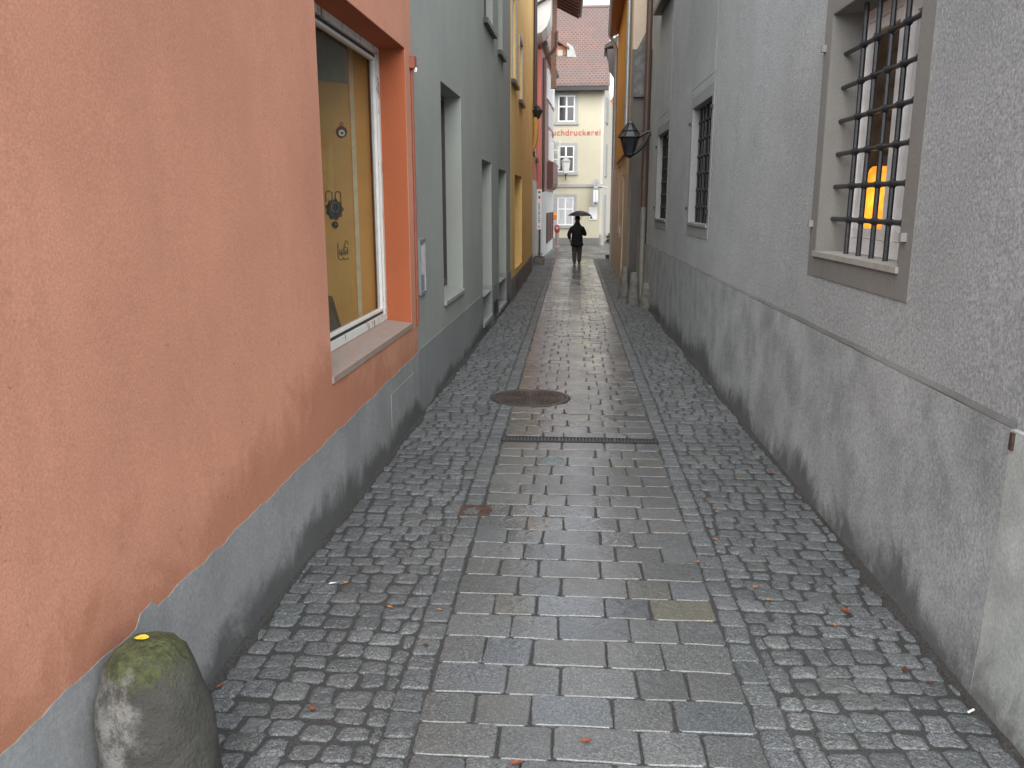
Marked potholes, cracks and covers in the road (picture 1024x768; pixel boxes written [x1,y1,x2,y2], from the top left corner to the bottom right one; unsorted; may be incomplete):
manhole cover [492,389,570,408]
